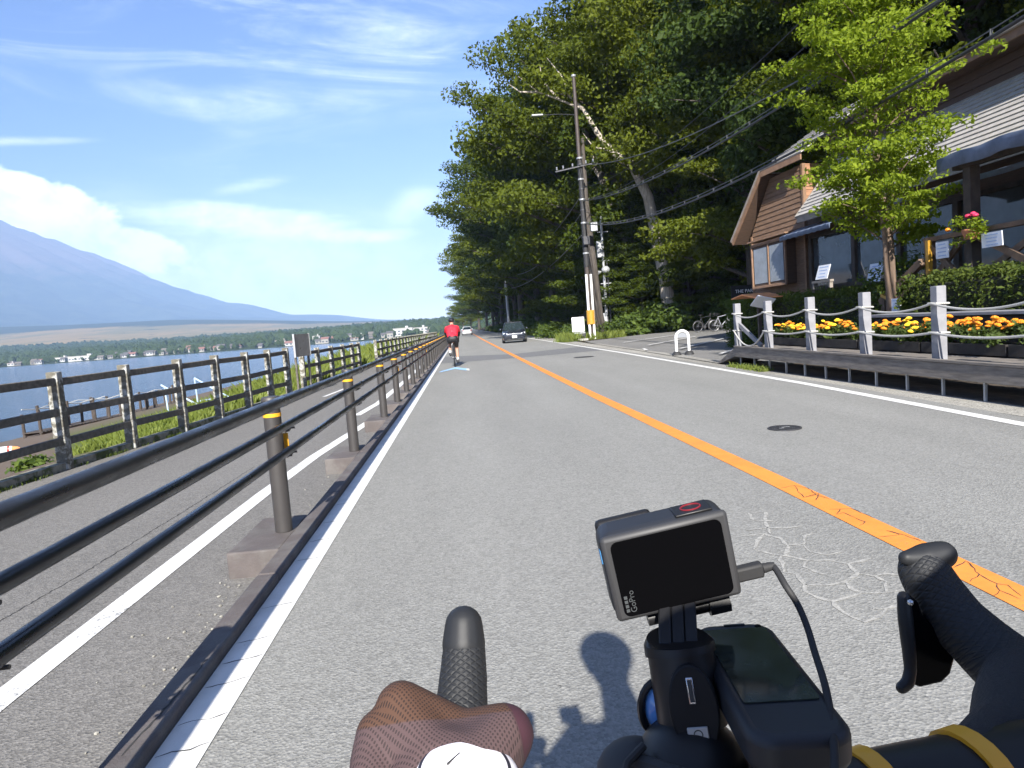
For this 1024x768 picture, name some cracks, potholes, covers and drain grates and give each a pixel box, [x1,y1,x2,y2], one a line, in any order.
crack [740,485,920,622]
